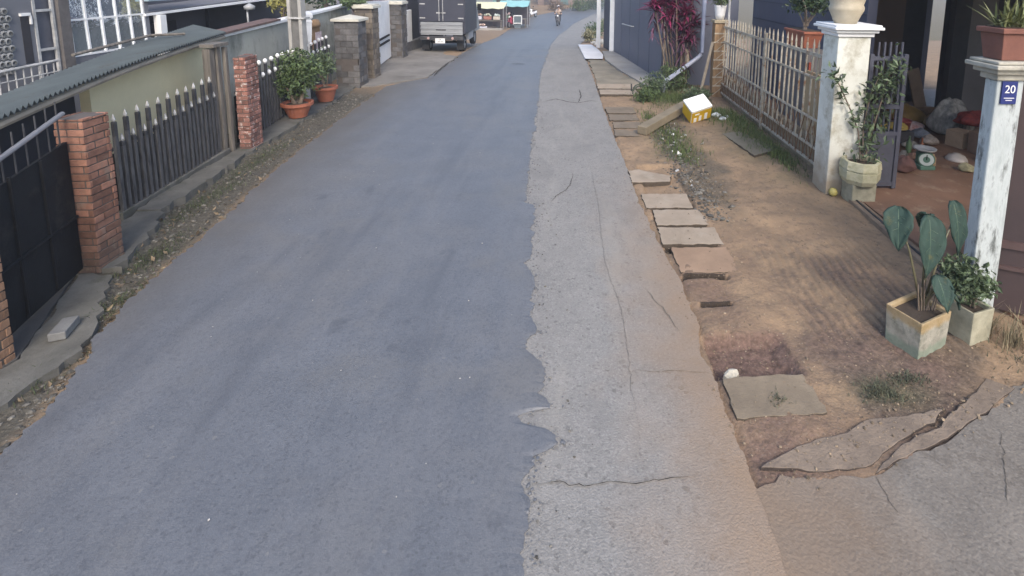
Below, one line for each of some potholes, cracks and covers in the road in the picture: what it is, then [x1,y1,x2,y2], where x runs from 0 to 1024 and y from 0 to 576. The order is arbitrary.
crack [552,159,639,466]
